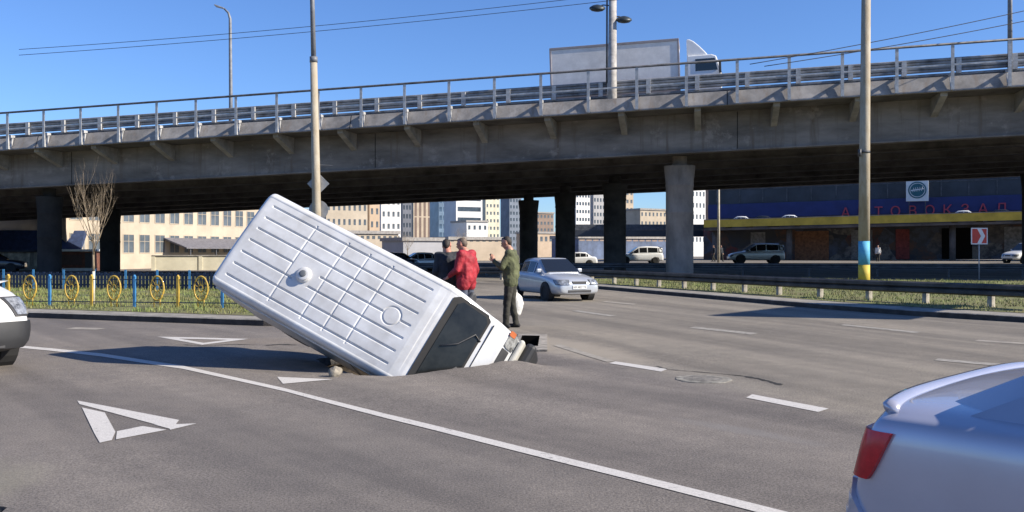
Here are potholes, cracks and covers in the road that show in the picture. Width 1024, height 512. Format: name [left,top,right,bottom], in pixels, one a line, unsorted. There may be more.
crack [658,366,783,385]
manhole cover [676,375,732,383]
